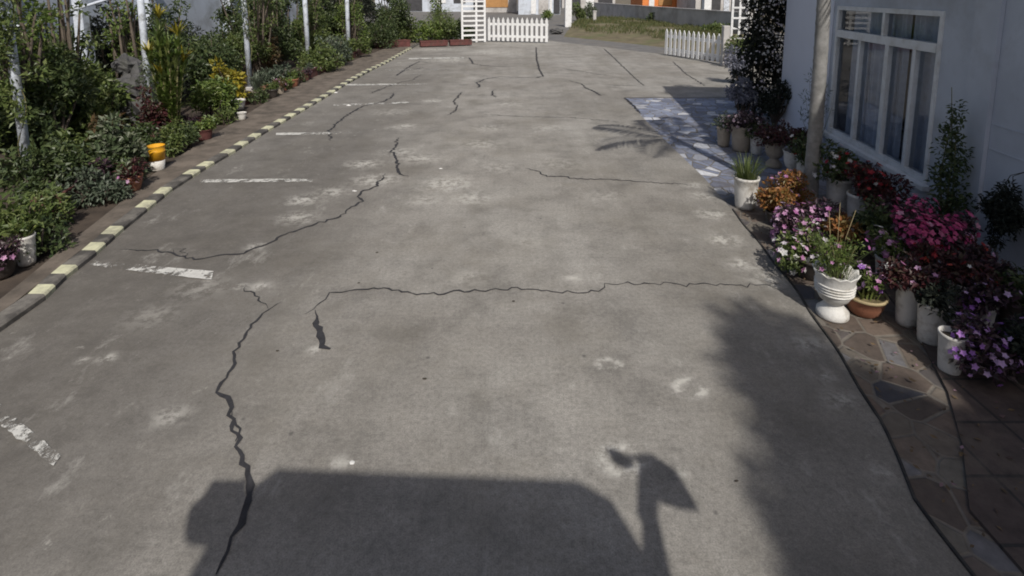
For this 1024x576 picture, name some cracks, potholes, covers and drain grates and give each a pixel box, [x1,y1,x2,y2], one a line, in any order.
crack [131,137,408,260]
crack [525,168,687,185]
crack [215,284,275,574]
crack [450,47,543,114]
crack [305,281,779,349]
crack [327,62,428,141]
